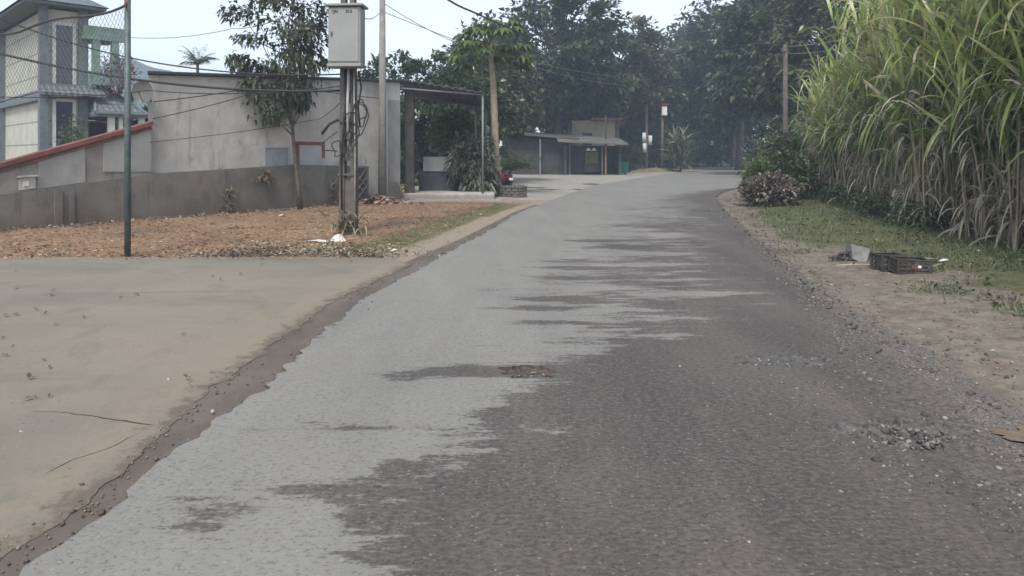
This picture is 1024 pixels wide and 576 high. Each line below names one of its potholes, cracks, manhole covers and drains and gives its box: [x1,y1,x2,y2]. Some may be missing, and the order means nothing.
pothole [730,354,837,367]
pothole [498,365,558,379]
pothole [822,418,978,453]
crack [32,411,157,473]
